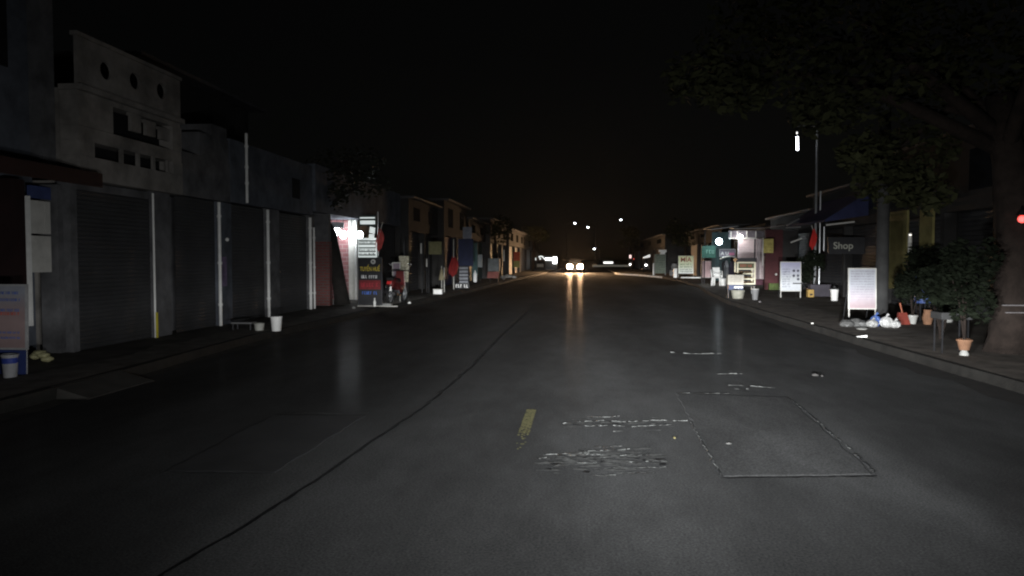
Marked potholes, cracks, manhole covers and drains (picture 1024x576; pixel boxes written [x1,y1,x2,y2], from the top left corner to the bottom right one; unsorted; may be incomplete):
crack [537,415,688,477]
crack [670,351,775,391]
